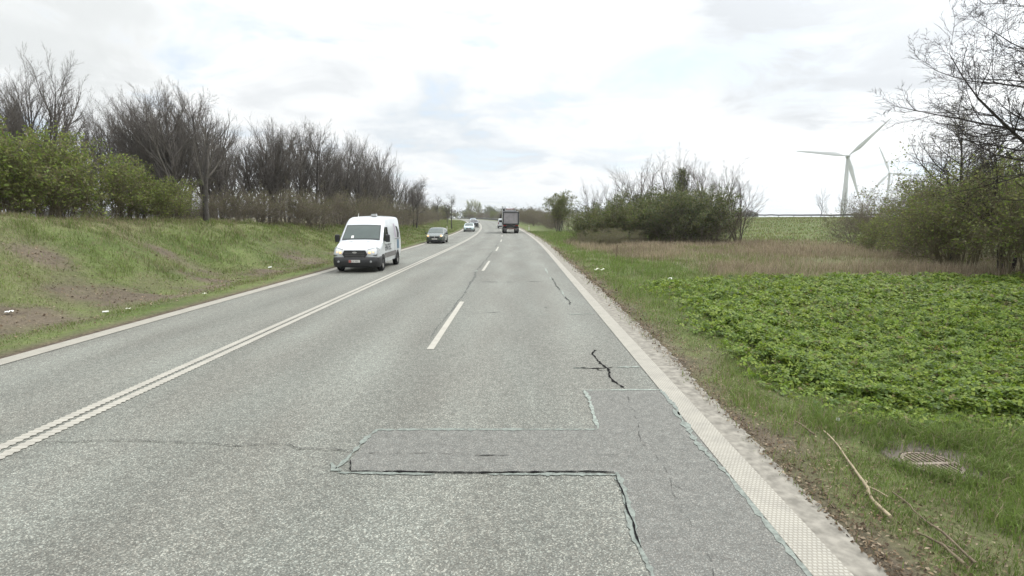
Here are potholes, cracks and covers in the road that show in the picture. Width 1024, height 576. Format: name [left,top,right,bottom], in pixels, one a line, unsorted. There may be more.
crack [57,350,747,576]
